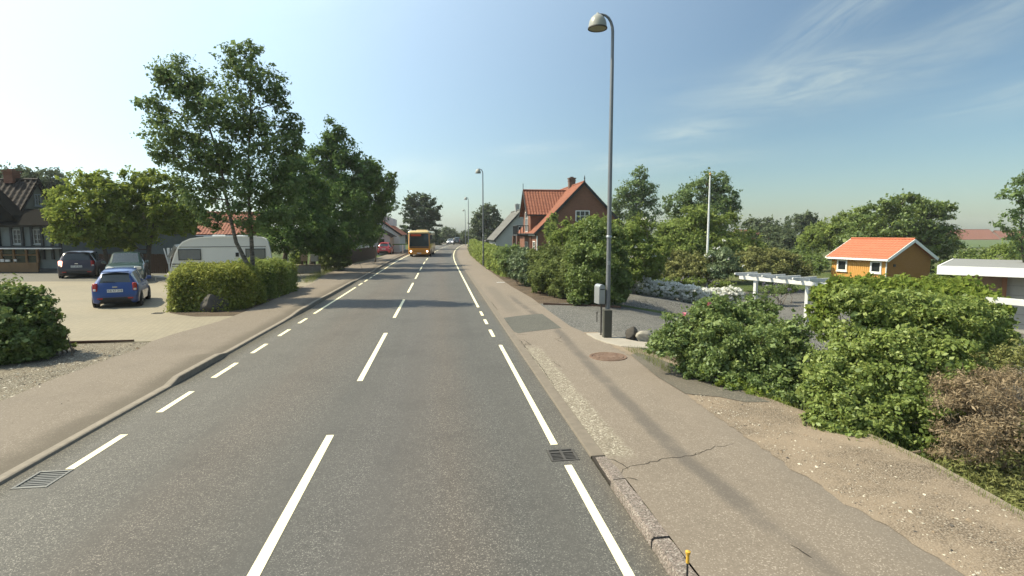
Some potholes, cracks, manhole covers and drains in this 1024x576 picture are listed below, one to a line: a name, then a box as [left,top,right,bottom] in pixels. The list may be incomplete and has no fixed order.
drain grate [546,448,580,462]
drain grate [10,469,73,490]
crack [607,444,730,480]
manhole cover [589,352,627,361]
